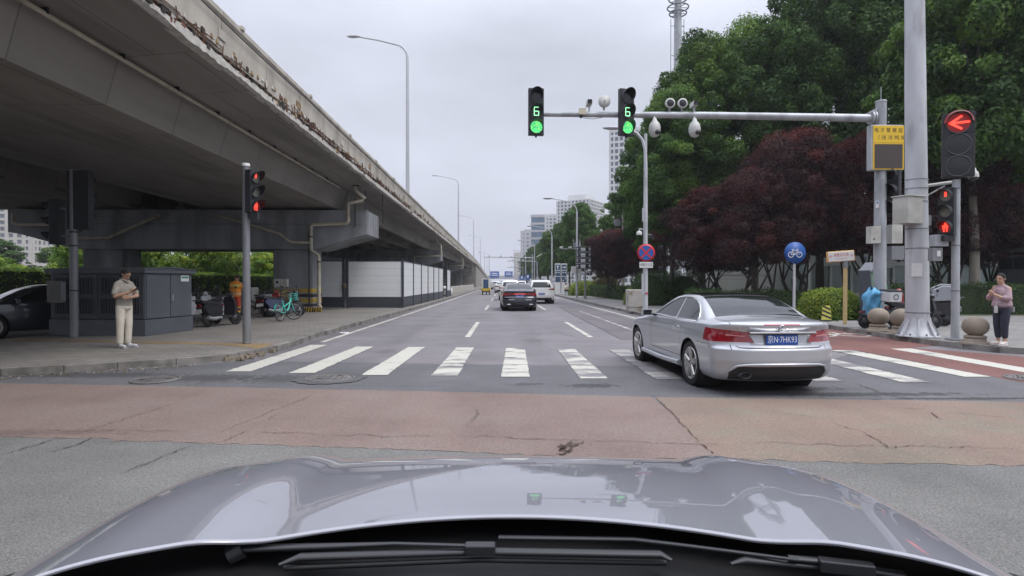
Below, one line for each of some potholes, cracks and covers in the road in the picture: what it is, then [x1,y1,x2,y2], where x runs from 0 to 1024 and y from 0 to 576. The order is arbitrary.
manhole cover [129,376,181,384]
manhole cover [291,372,367,384]
crack [217,395,1019,455]
crack [2,402,191,472]
